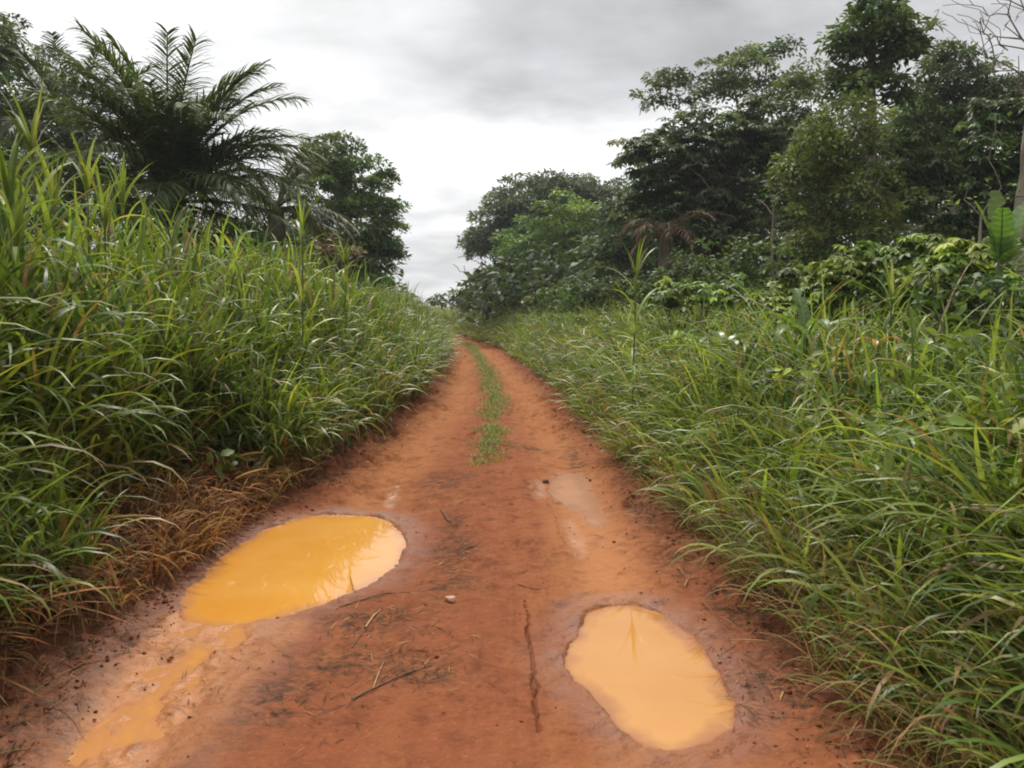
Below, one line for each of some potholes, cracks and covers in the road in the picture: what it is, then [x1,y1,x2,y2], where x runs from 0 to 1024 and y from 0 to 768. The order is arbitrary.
pothole [68,509,419,767]
crack [524,594,542,734]
pothole [546,596,760,764]
pothole [547,471,611,528]
